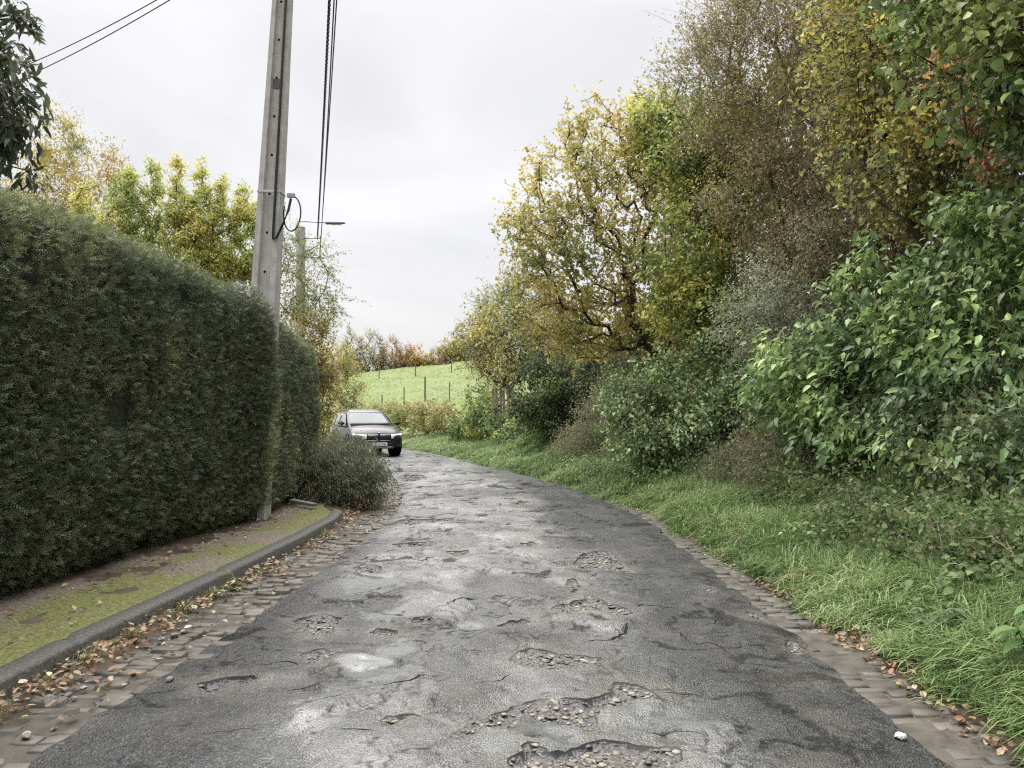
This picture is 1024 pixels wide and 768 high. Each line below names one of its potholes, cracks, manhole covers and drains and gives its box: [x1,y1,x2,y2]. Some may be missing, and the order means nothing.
pothole [449,681,664,739]
pothole [299,648,342,664]
pothole [507,739,683,768]
pothole [573,550,635,573]
pothole [508,648,604,670]
pothole [353,564,386,574]
pothole [411,616,434,625]
pothole [196,675,258,694]
pothole [369,628,402,637]
pothole [294,614,343,635]
crack [666,618,735,657]
pothole [551,596,637,616]
